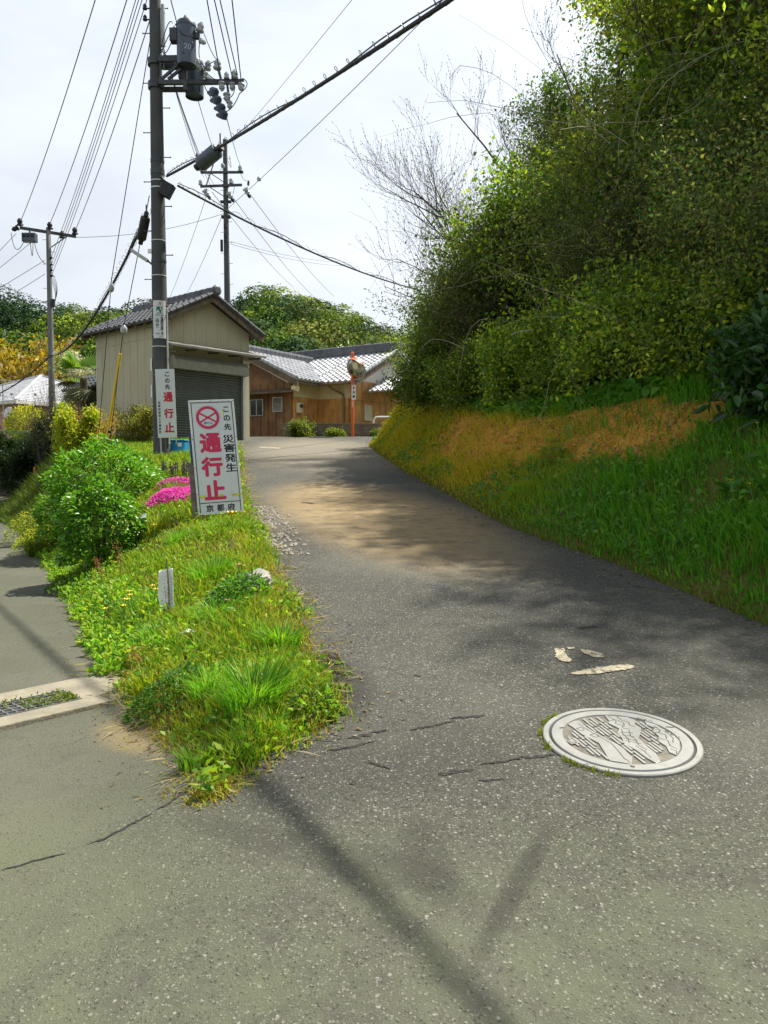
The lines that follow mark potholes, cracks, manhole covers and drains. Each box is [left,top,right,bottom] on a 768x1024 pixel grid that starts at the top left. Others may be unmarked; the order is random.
drain grate [0,674,121,732]
crack [438,754,555,782]
crack [326,729,391,785]
manhole cover [543,708,704,778]
crack [410,715,484,730]
